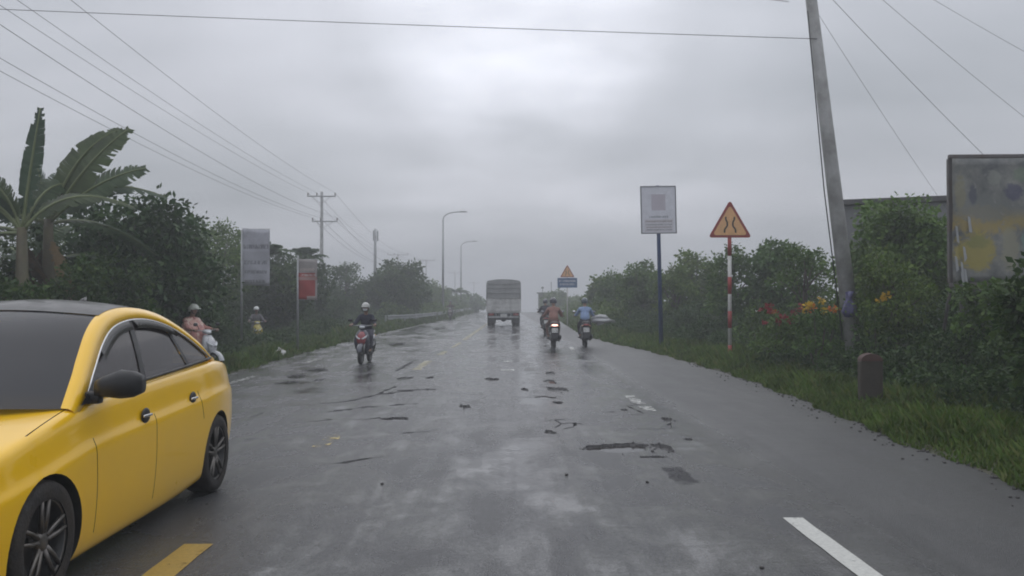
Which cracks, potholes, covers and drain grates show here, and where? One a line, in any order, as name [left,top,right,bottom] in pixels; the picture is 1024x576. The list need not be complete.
crack [309,362,436,422]
crack [329,456,385,464]
pothole [579,441,657,454]
crack [544,404,679,430]
pothole [652,442,675,452]
